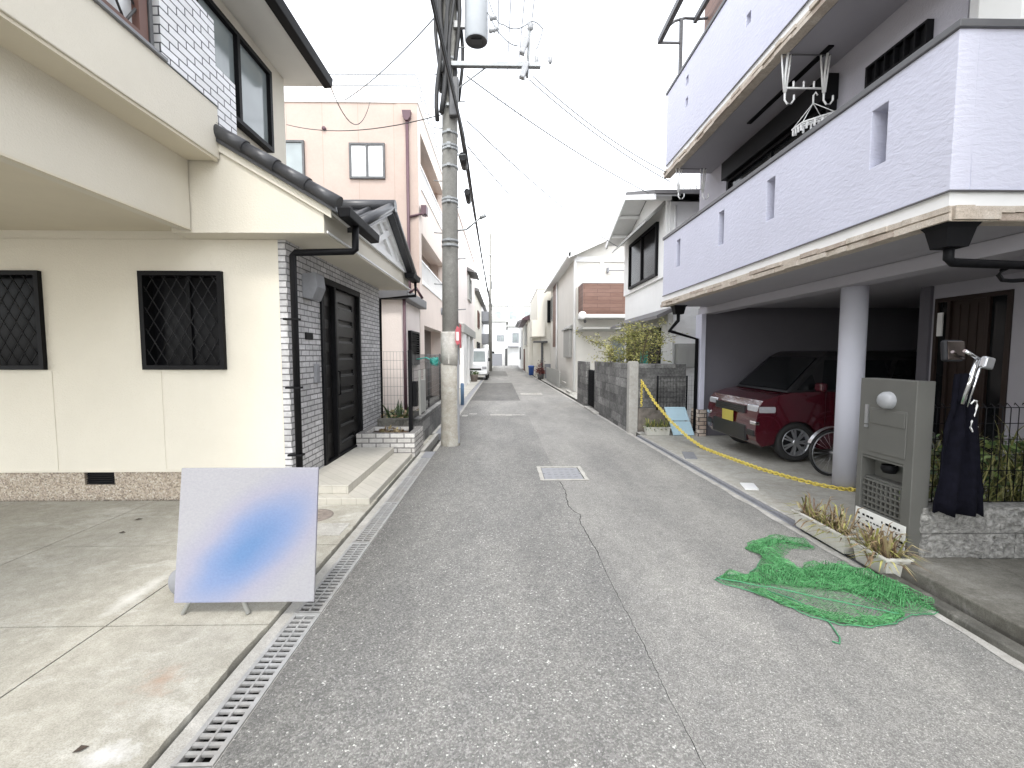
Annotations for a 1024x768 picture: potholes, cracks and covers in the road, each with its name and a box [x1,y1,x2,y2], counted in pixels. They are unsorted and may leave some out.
manhole cover [317,509,334,522]
drain grate [170,613,321,768]
drain grate [295,542,371,613]
crack [560,482,706,768]
drain grate [352,502,400,543]
drain grate [406,458,431,476]
manhole cover [536,466,589,481]
drain grate [385,476,418,502]
